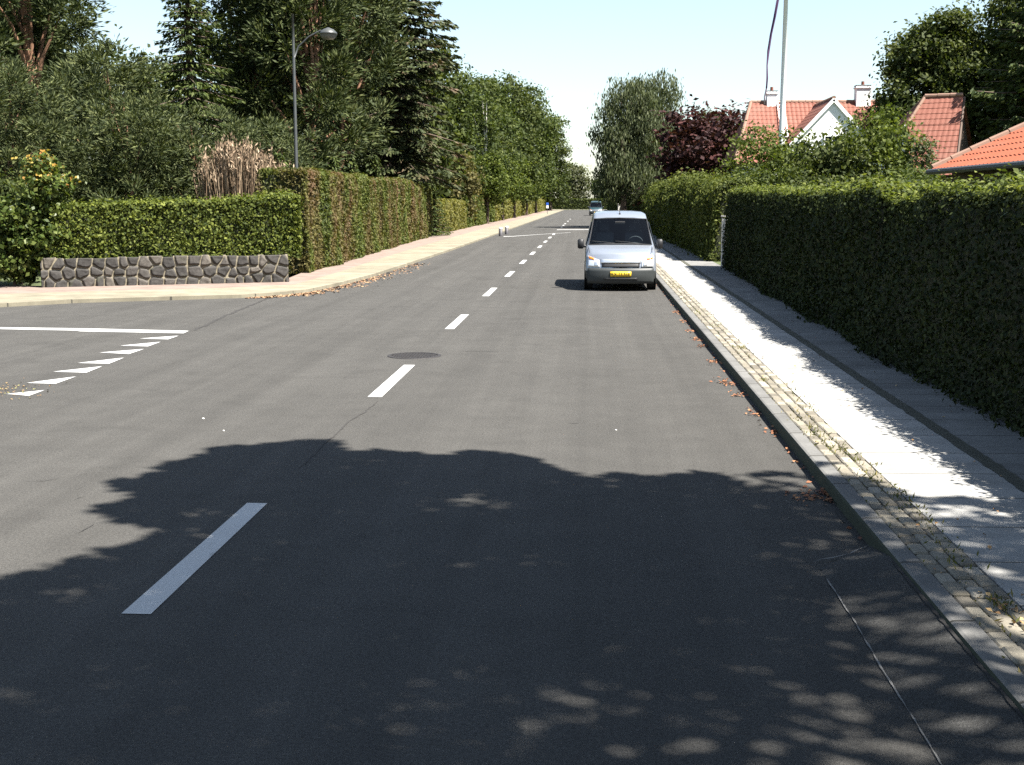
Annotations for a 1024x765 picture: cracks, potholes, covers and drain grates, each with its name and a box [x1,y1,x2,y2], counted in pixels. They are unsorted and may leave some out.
crack [299,402,377,469]
